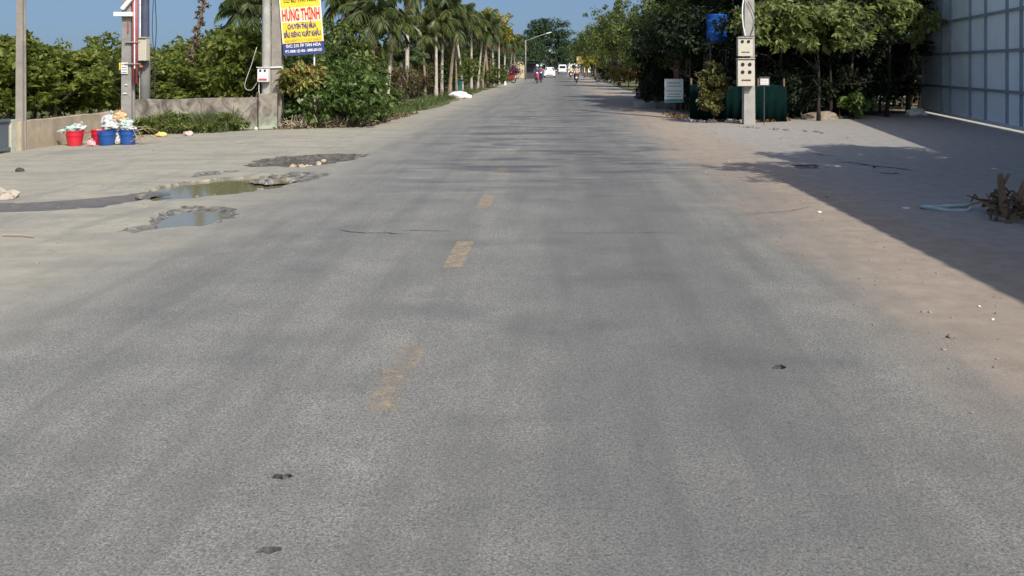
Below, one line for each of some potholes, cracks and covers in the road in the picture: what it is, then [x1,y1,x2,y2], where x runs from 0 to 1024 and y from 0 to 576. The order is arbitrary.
pothole [247,172,332,186]
pothole [135,176,298,201]
crack [811,152,913,174]
pothole [118,205,242,233]
pothole [243,154,370,167]
